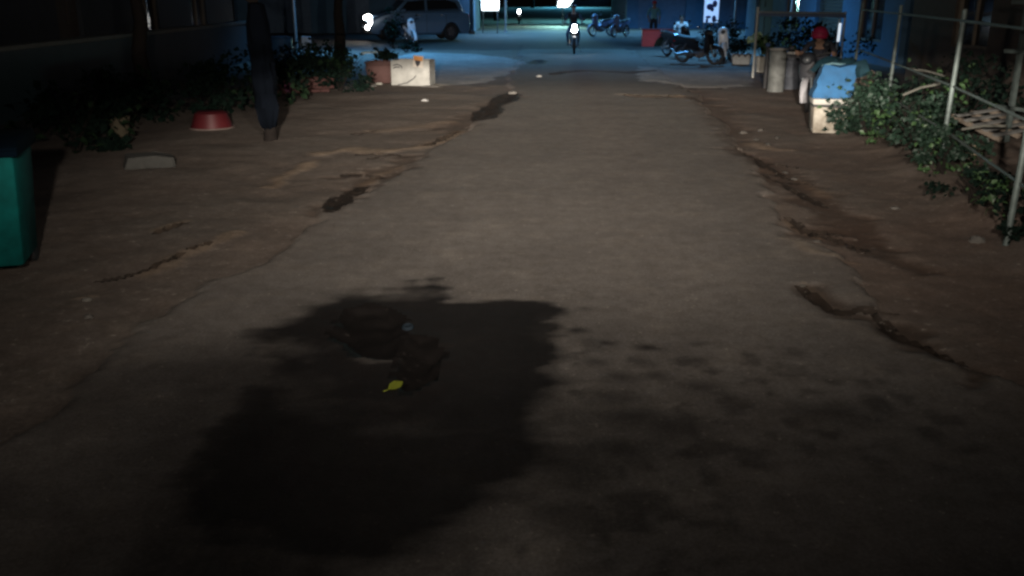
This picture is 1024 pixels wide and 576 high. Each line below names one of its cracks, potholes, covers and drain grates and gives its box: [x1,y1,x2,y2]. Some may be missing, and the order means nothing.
pothole [470,92,522,122]
crack [794,285,968,367]
pothole [323,302,413,360]
pothole [321,187,368,213]
pothole [387,334,451,396]
crack [734,147,871,254]
crack [94,222,213,283]
